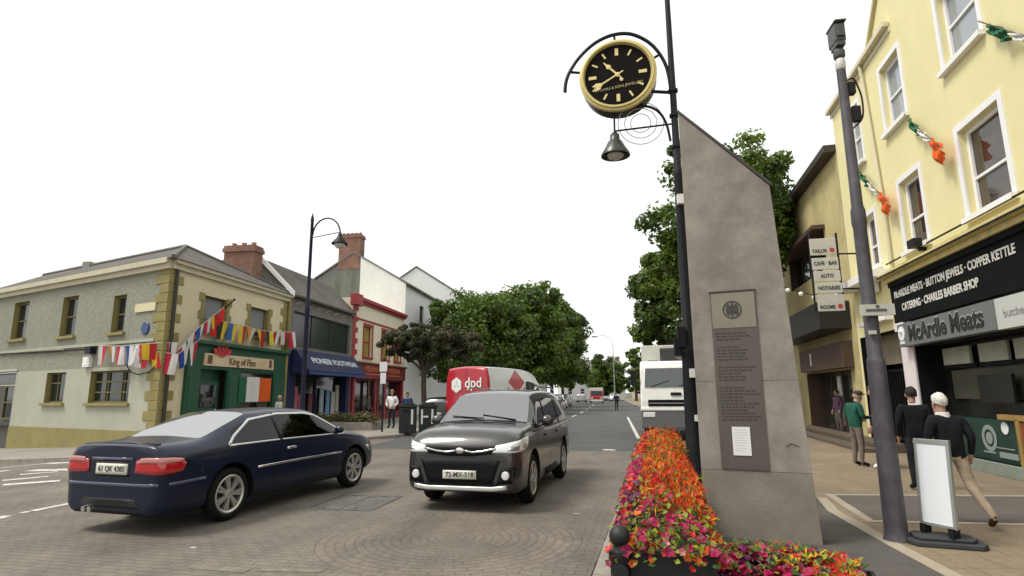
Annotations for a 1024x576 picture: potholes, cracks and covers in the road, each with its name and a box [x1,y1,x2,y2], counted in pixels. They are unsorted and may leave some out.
manhole cover [303,494,403,511]
